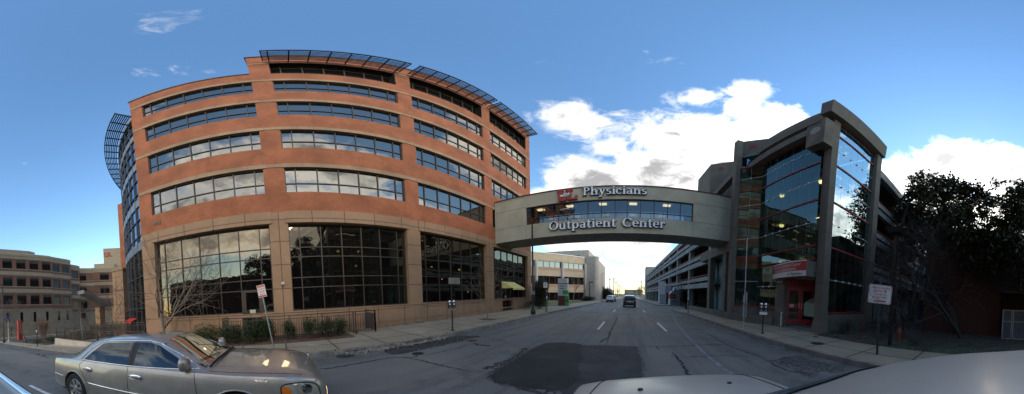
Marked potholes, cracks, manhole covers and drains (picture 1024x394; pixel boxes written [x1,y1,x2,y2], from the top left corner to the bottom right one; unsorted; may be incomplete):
crack [672,352,727,375]
